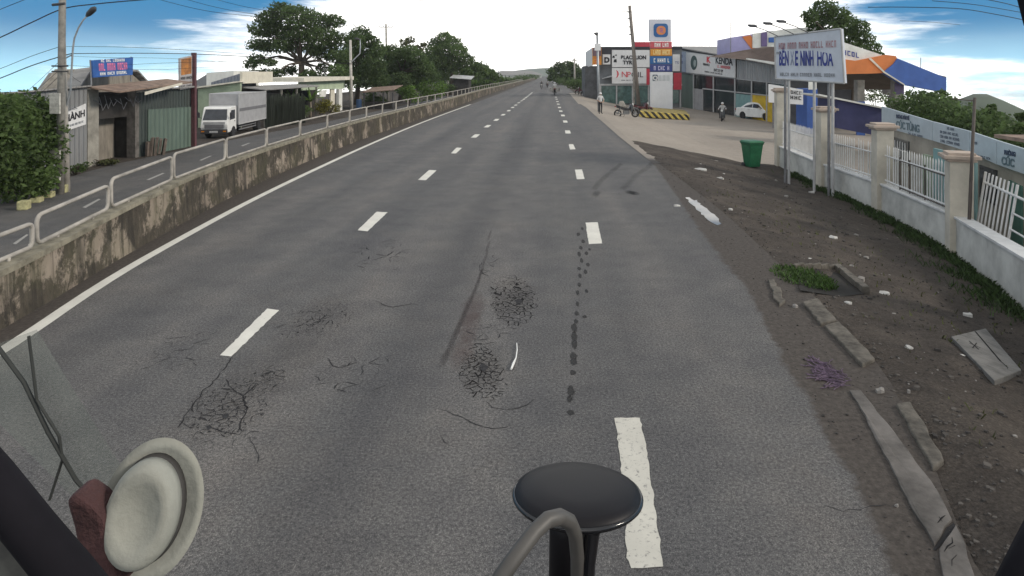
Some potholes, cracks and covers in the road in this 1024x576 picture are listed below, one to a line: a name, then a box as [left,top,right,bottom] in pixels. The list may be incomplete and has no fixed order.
crack [315,349,406,394]
crack [136,324,285,464]
crack [442,255,538,429]
